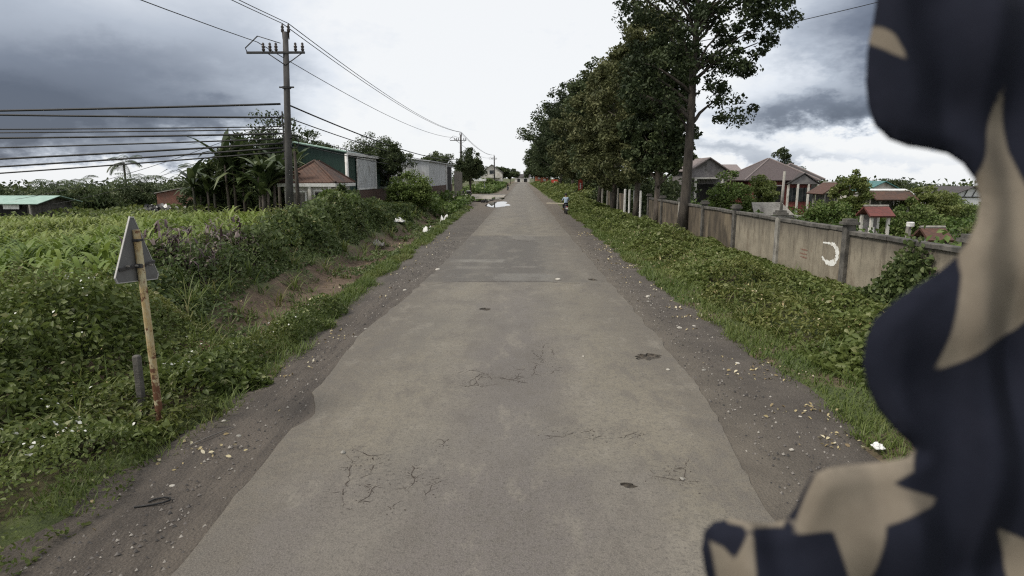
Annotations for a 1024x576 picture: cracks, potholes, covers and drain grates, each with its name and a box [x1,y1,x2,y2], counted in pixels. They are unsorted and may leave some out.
crack [650,458,701,494]
crack [407,439,449,498]
pothole [634,353,662,361]
crack [458,343,560,387]
crack [332,446,406,512]
